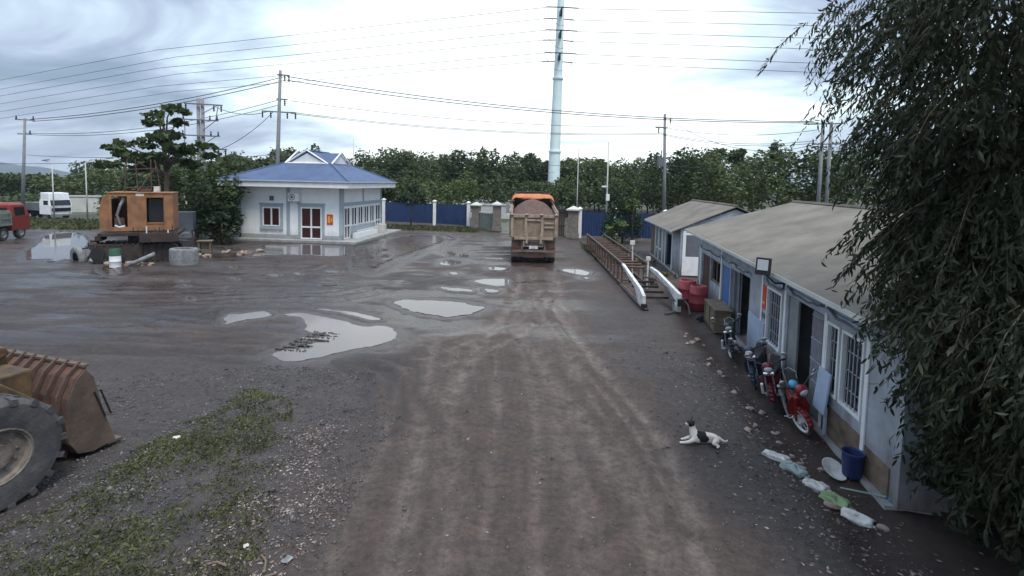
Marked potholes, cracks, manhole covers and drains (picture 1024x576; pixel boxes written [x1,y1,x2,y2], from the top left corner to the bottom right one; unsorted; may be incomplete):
pothole [382,297,495,321]
pothole [467,278,517,288]
pothole [557,268,595,277]
